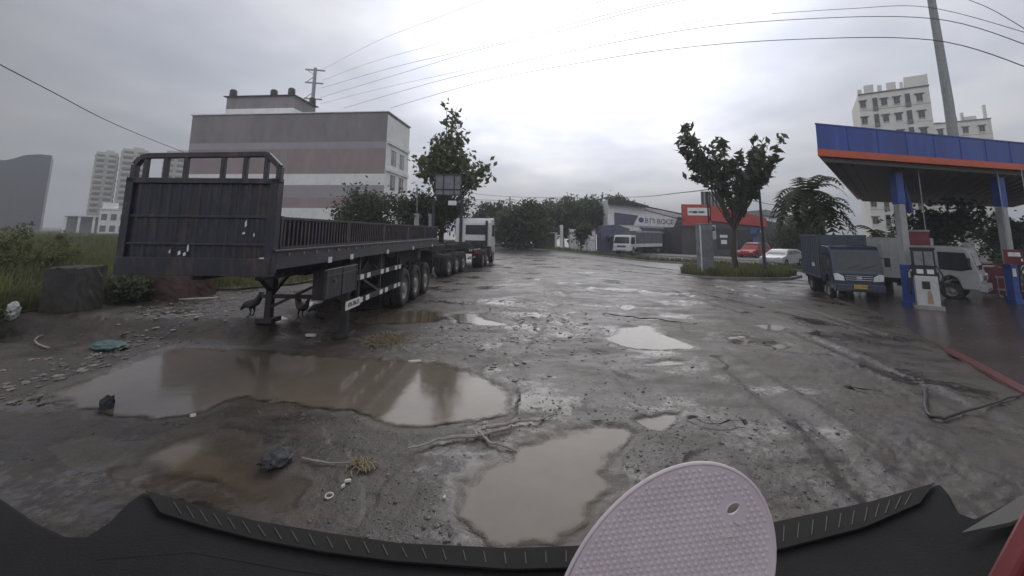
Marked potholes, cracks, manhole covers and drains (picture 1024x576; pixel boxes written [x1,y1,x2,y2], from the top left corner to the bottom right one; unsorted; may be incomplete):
pothole [597,323,701,352]
crack [687,415,746,430]
crack [850,384,882,394]
pothole [36,342,521,433]
pothole [48,422,313,514]
pothole [433,420,644,548]
pothole [624,410,685,431]
pothole [444,311,515,327]
